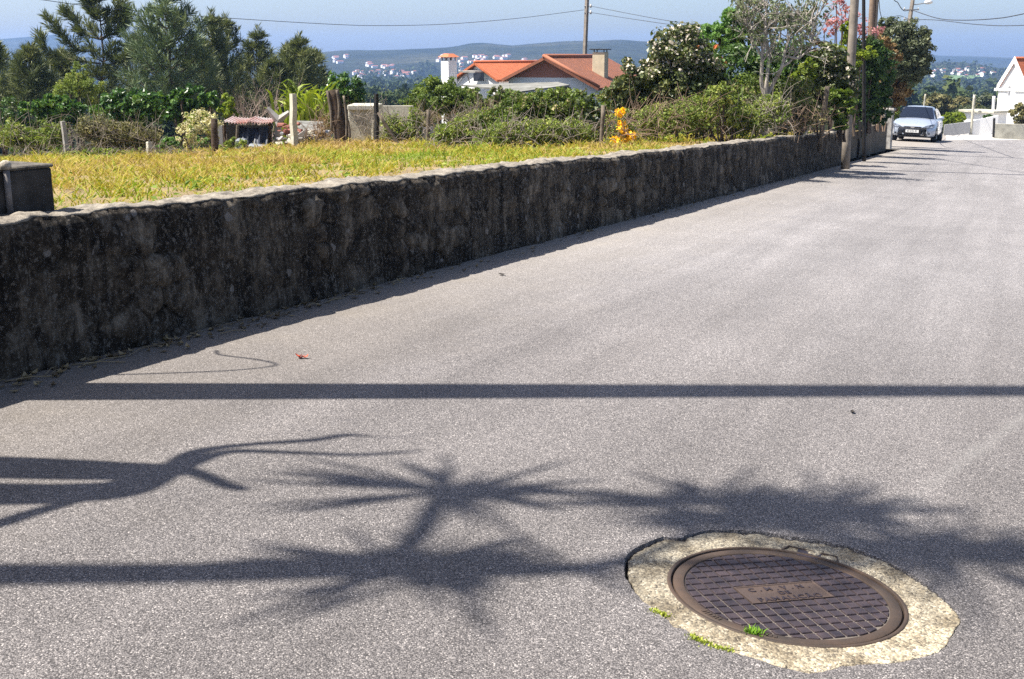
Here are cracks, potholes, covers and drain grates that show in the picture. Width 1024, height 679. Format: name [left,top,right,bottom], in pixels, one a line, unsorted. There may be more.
manhole cover [667,545,909,648]
